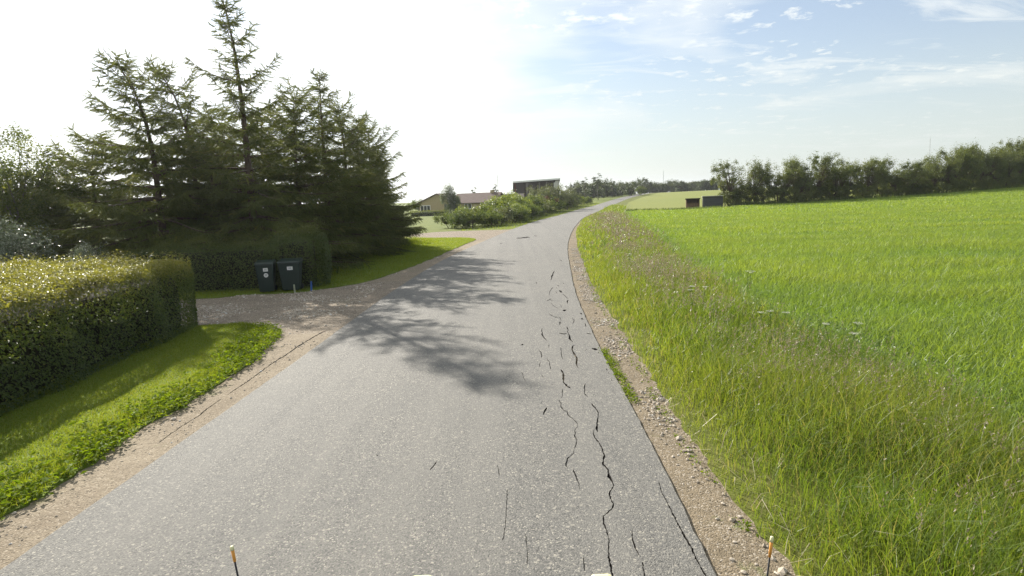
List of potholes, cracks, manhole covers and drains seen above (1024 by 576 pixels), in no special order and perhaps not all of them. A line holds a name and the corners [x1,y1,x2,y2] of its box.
crack [659,483,706,576]
crack [522,272,614,576]
